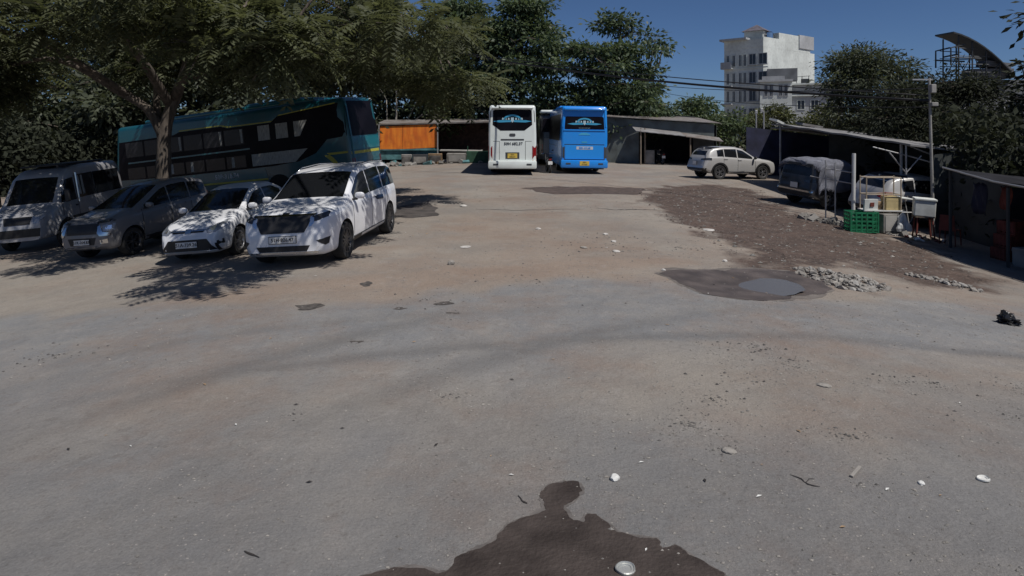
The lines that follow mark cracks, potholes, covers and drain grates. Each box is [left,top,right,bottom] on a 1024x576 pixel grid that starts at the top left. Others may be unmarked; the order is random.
pothole [655,267,835,301]
